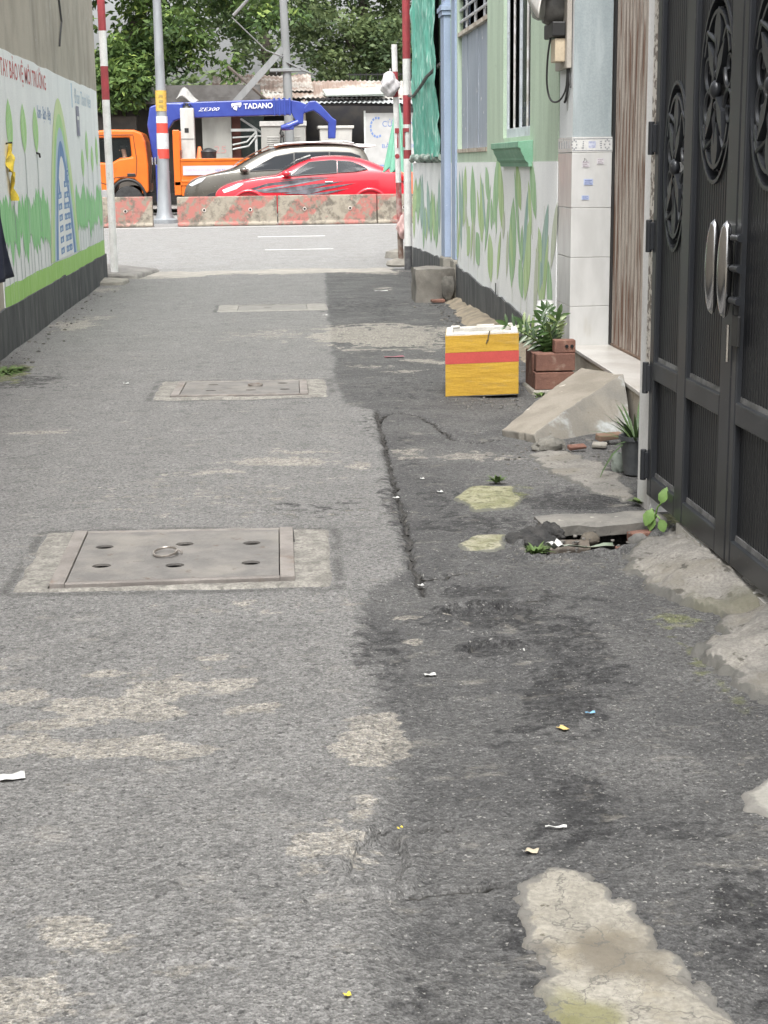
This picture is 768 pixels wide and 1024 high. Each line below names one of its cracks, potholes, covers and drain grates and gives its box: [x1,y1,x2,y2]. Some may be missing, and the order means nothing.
crack [374,412,495,598]
manhole cover [217,303,328,312]
pothole [448,636,536,664]
manhole cover [13,527,332,593]
manhole cover [153,379,328,401]
crack [372,888,496,901]
pothole [430,598,536,636]
pothole [512,520,663,562]
